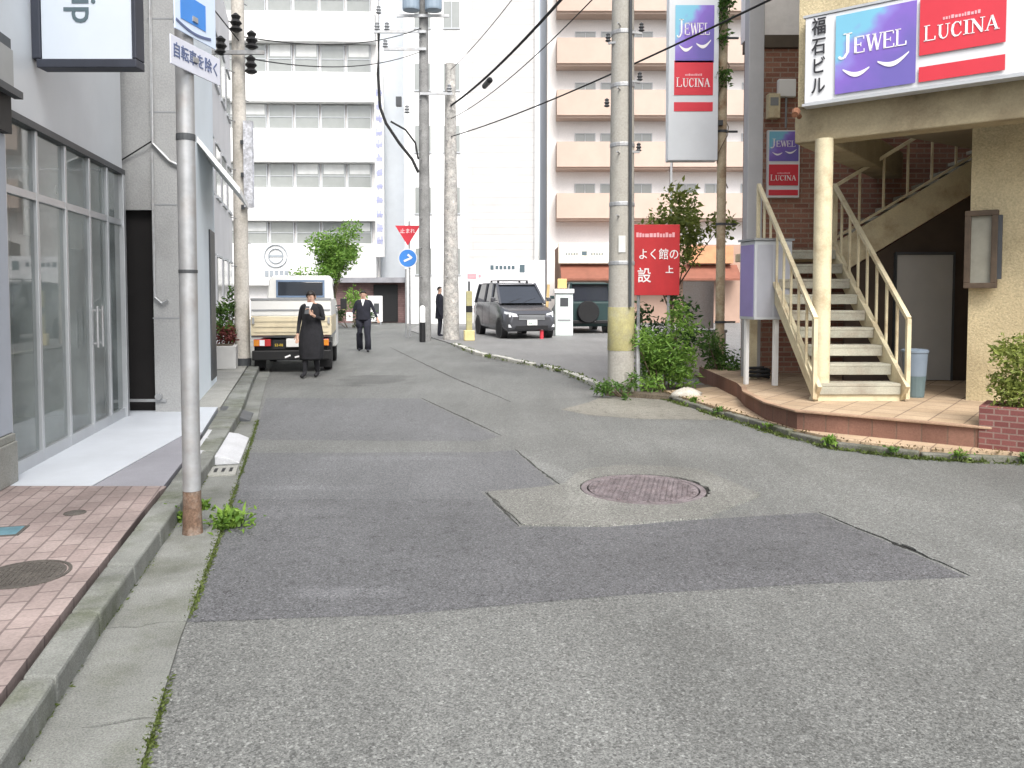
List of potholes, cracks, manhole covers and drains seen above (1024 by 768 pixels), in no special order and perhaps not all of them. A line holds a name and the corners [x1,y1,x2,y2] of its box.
manhole cover [580,475,710,505]
drain grate [207,465,239,477]
manhole cover [0,560,73,590]
